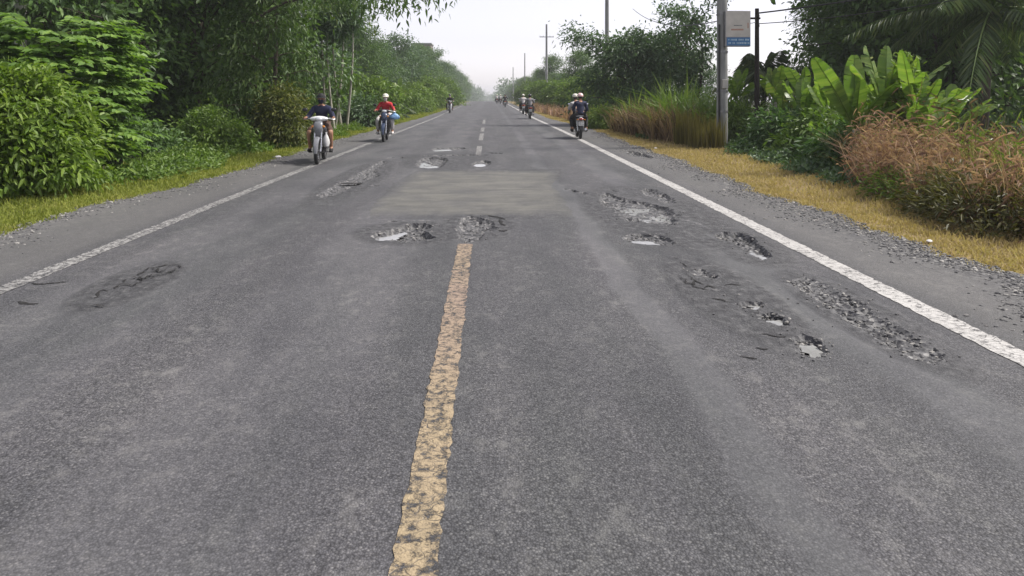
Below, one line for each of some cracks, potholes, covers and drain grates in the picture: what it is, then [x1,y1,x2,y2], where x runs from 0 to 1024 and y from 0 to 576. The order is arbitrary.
pothole [710,228,775,263]
pothole [590,192,684,225]
crack [86,264,181,306]
pothole [316,160,388,198]
pothole [640,188,677,204]
pothole [786,273,987,378]
pothole [682,268,723,282]
pothole [619,232,690,248]
pothole [368,221,449,242]
pothole [416,157,449,168]
pothole [448,215,499,243]
